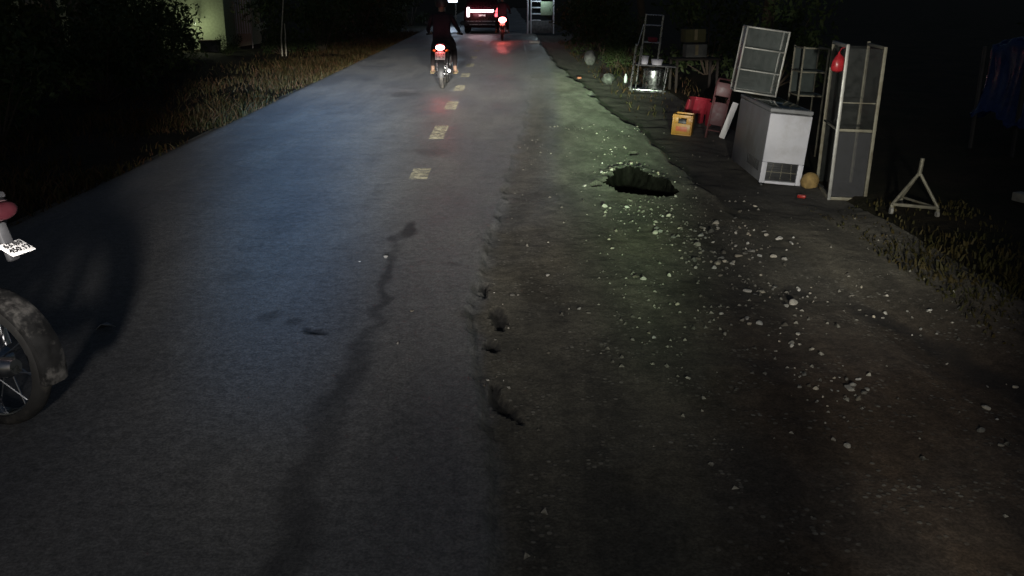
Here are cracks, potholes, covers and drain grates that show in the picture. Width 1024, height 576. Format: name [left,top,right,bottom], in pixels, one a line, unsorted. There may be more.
pothole [484,305,513,333]
pothole [487,379,530,428]
pothole [603,166,679,197]
pothole [482,339,502,355]
pothole [300,326,335,337]
